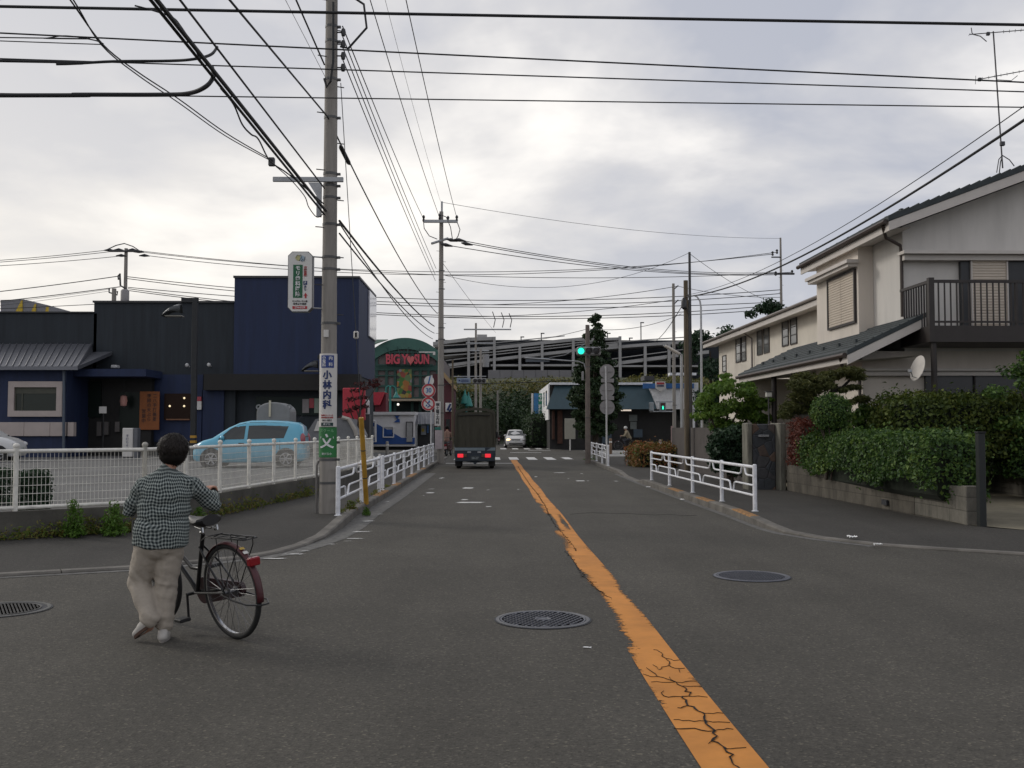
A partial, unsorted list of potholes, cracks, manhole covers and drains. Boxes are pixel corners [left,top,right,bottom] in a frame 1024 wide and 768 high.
crack [644,649,746,768]
manhole cover [0,601,53,617]
manhole cover [494,610,591,629]
crack [518,467,696,598]
manhole cover [712,570,792,582]
